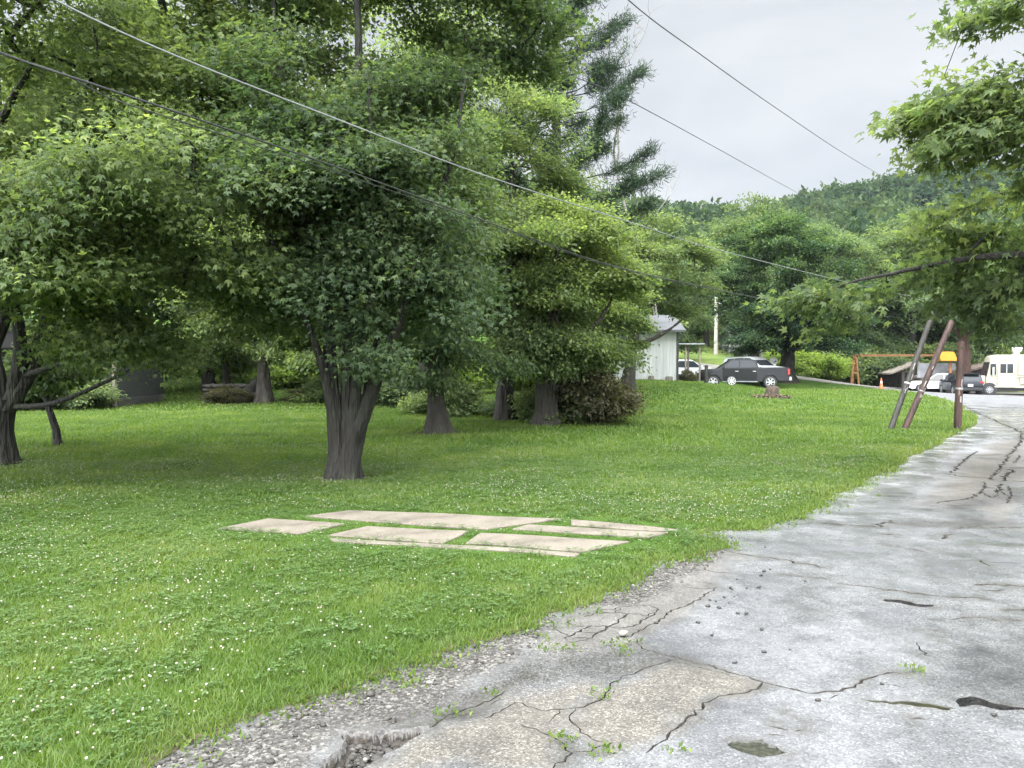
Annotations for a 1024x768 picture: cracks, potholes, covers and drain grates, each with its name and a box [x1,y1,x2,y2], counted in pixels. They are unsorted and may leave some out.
pothole [956,696,1024,710]
crack [430,570,908,768]
crack [725,550,1024,656]
crack [930,406,1024,504]
pothole [728,739,785,757]
pothole [318,726,429,768]
